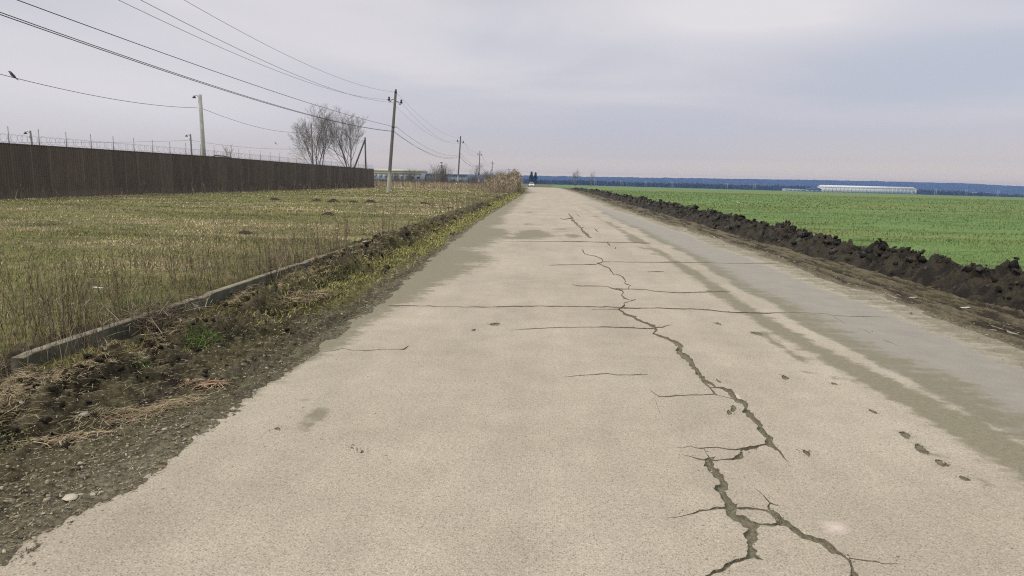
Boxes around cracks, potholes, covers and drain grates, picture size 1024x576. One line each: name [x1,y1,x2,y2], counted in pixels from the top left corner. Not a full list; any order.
crack [519,213,636,246]
crack [388,249,898,576]
